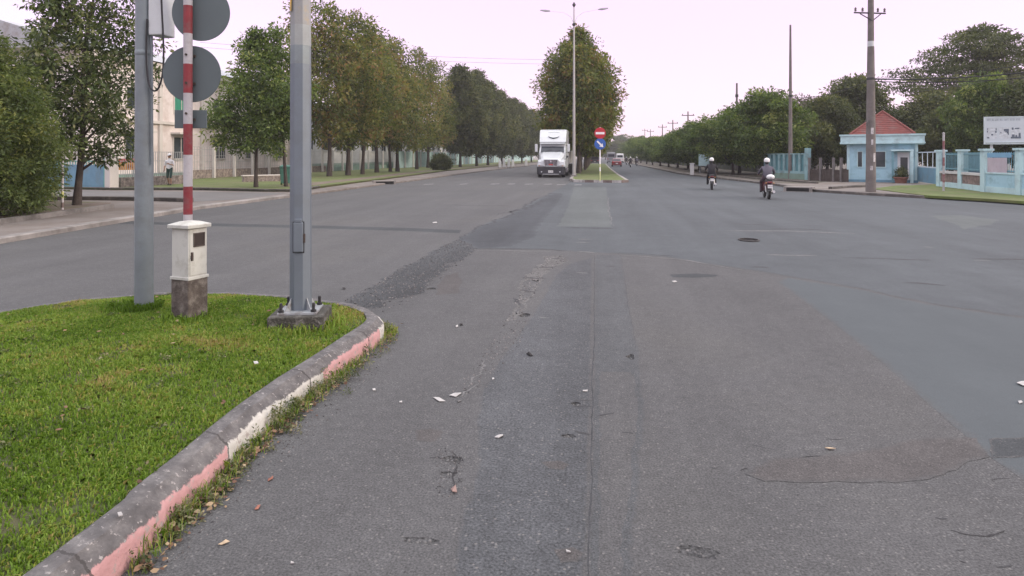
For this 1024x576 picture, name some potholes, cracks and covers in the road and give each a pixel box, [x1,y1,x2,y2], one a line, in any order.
crack [431,450,458,486]
pothole [402,537,443,545]
pothole [675,545,720,560]
crack [936,517,1005,563]
